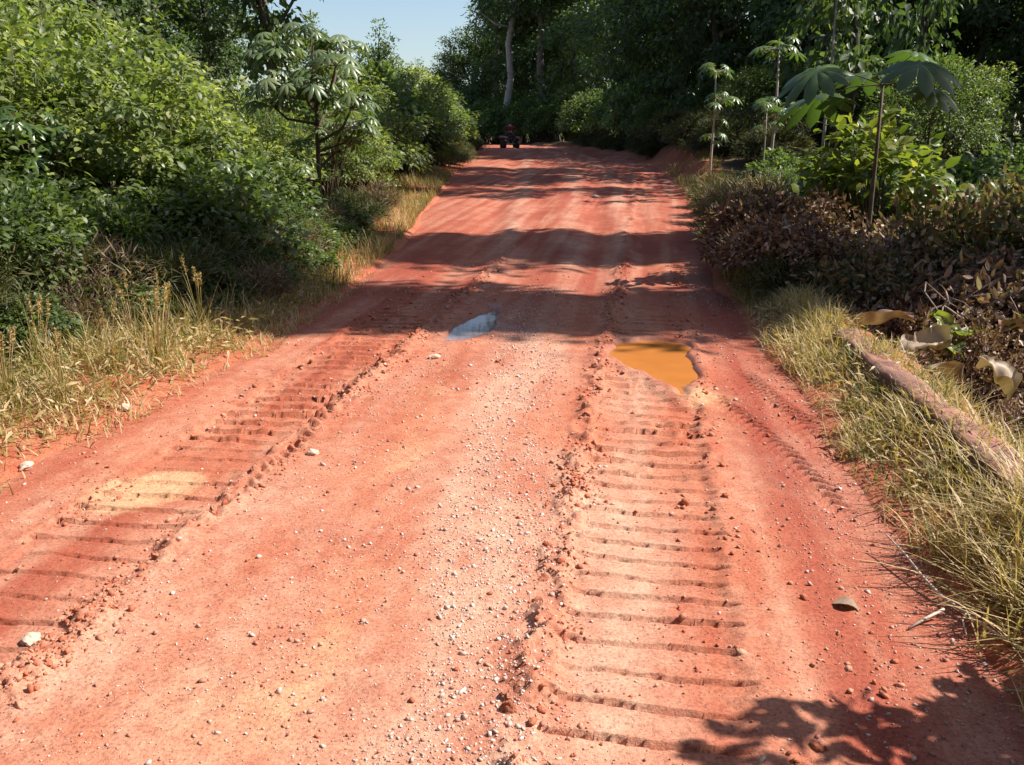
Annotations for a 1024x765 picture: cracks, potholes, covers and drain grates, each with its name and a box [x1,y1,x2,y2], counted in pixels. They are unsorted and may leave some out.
pothole [435,302,508,345]
pothole [599,334,708,400]
